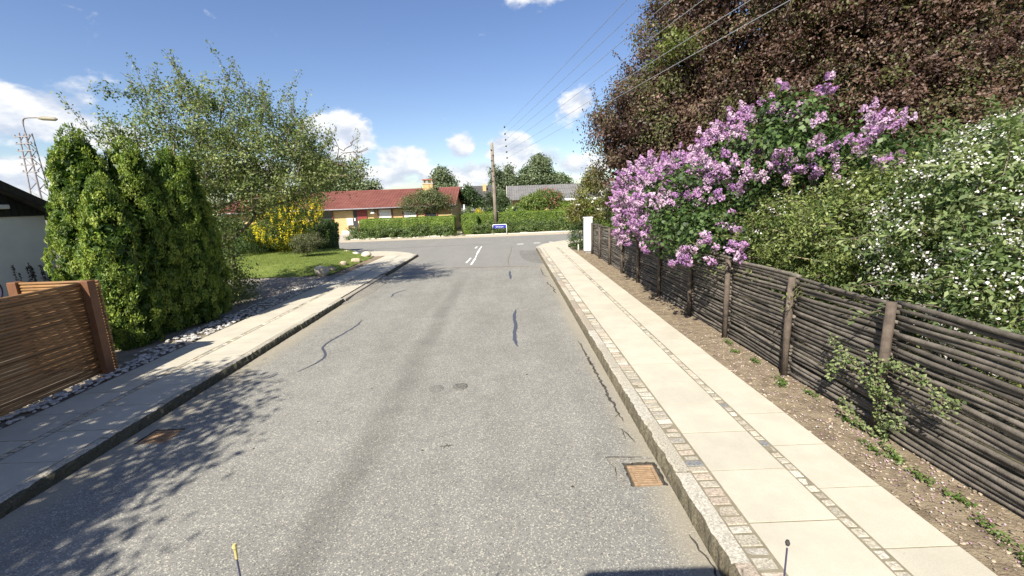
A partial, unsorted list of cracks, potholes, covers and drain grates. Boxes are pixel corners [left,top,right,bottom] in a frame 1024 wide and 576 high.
drain grate [626,465,663,487]
drain grate [137,430,183,445]
crack [578,341,636,479]
